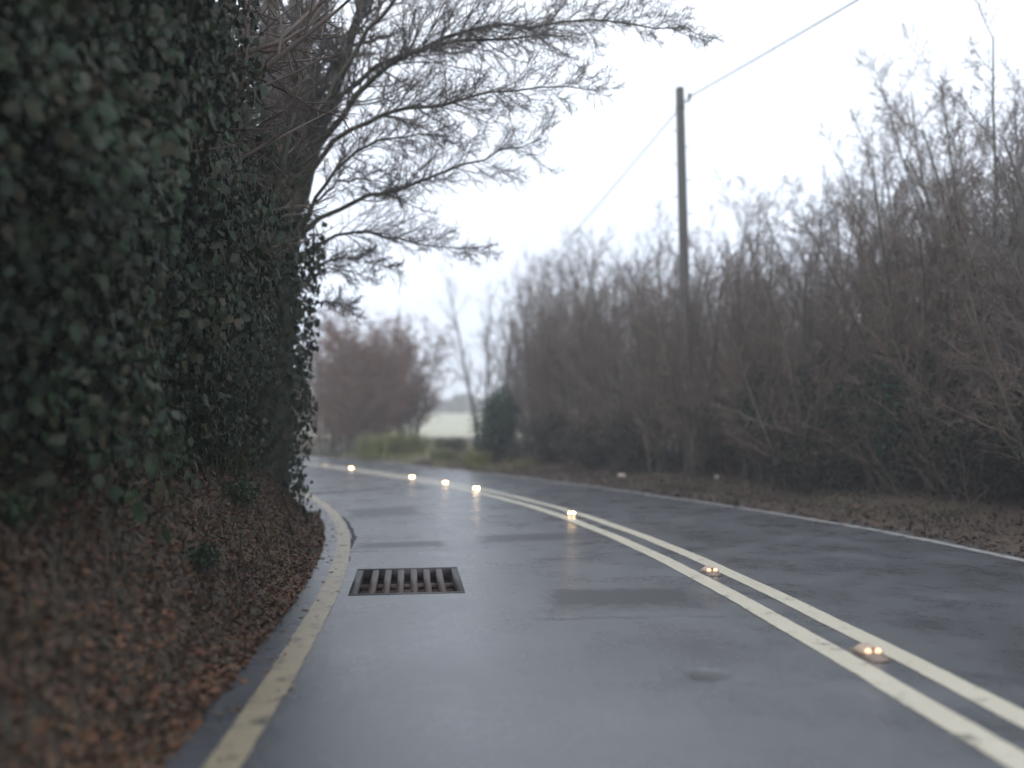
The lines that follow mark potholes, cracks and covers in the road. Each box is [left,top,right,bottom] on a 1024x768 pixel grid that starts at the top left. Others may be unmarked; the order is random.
pothole [683,668,732,681]
drain grate [348,567,465,596]
